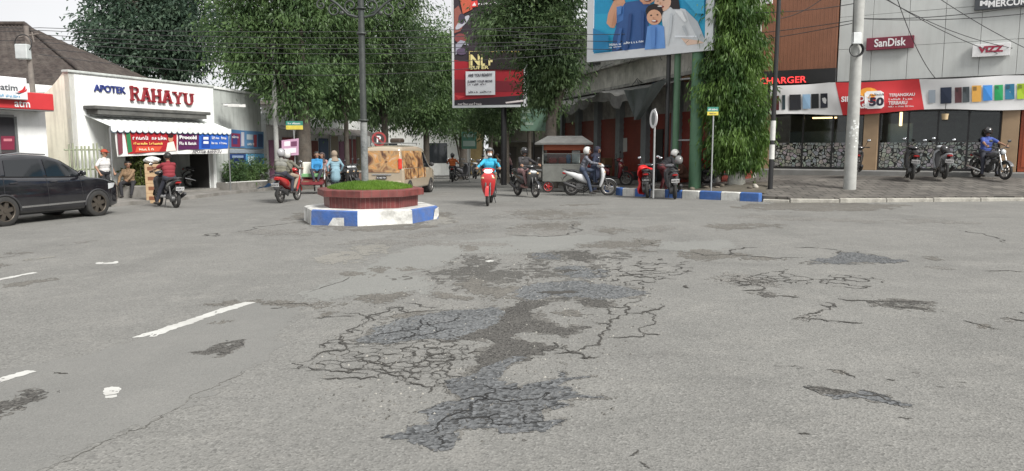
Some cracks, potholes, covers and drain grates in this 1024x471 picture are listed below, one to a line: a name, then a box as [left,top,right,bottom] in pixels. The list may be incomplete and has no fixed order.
crack [275,303,569,445]
crack [537,240,926,359]
